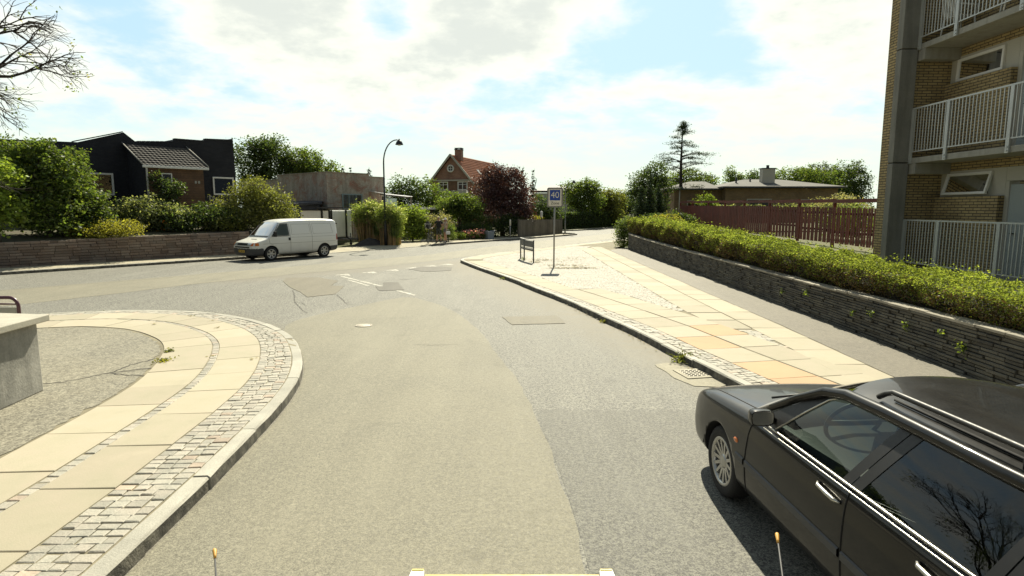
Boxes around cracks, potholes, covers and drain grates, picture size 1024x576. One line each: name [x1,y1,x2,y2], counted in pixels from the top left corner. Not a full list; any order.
crack [43,358,156,384]
drain grate [673,368,713,379]
